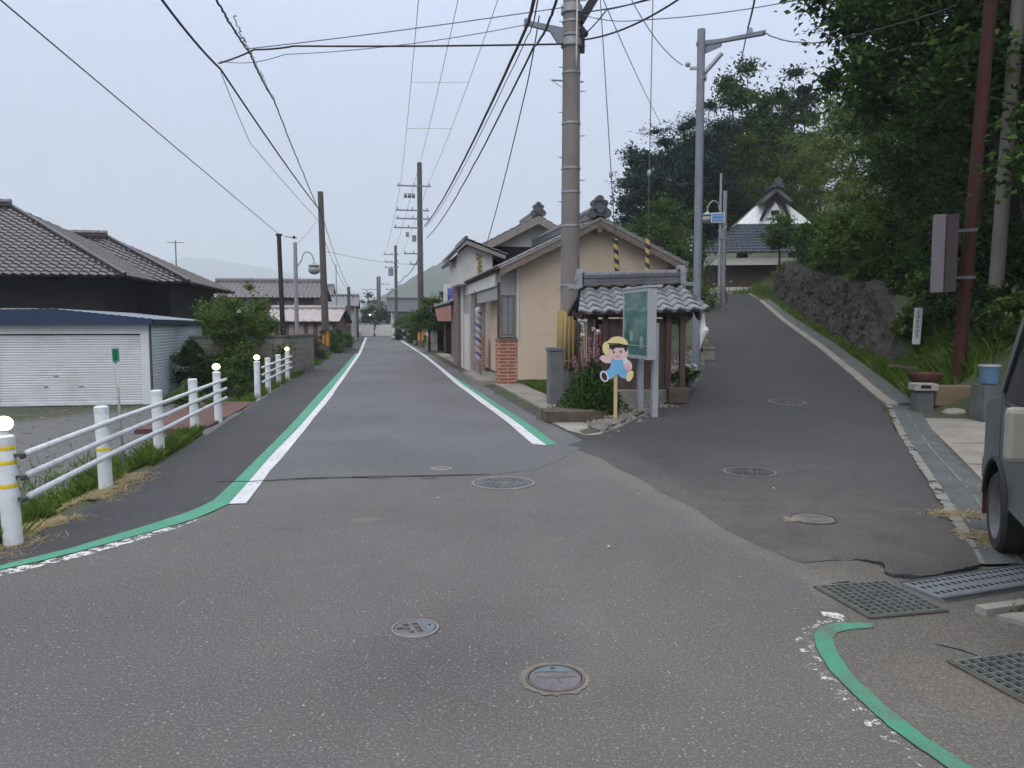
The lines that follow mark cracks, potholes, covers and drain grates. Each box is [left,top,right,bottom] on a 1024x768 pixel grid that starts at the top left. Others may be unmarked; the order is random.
drain grate [813,580,949,619]
manhole cover [391,618,439,639]
manhole cover [723,467,777,477]
drain grate [946,650,1024,704]
drain grate [900,563,1024,603]
manhole cover [471,476,535,490]
manhole cover [519,662,589,696]
manhole cover [788,512,838,525]
